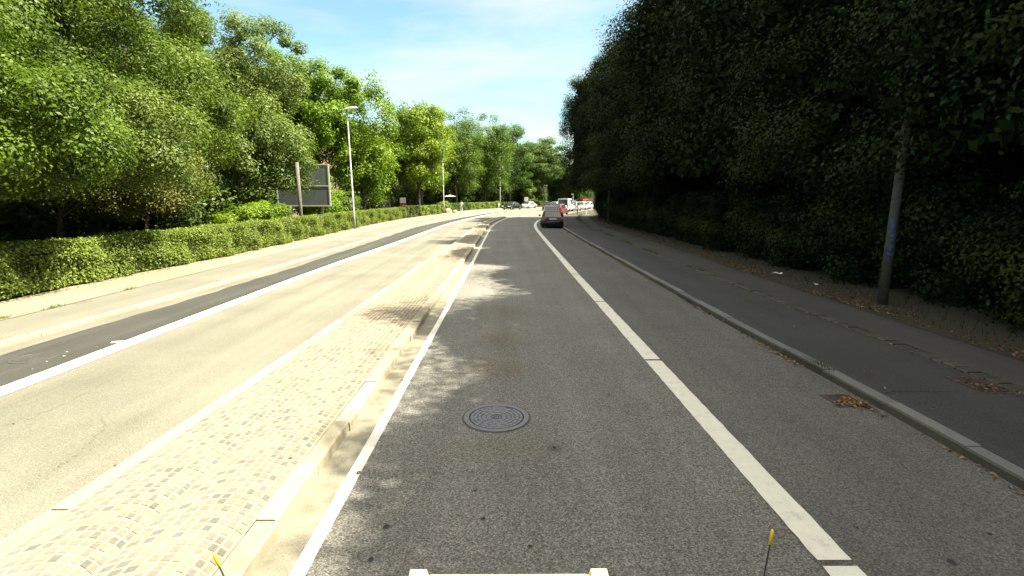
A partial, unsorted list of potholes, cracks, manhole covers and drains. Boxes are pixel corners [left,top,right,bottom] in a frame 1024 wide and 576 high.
manhole cover [462,404,531,433]
